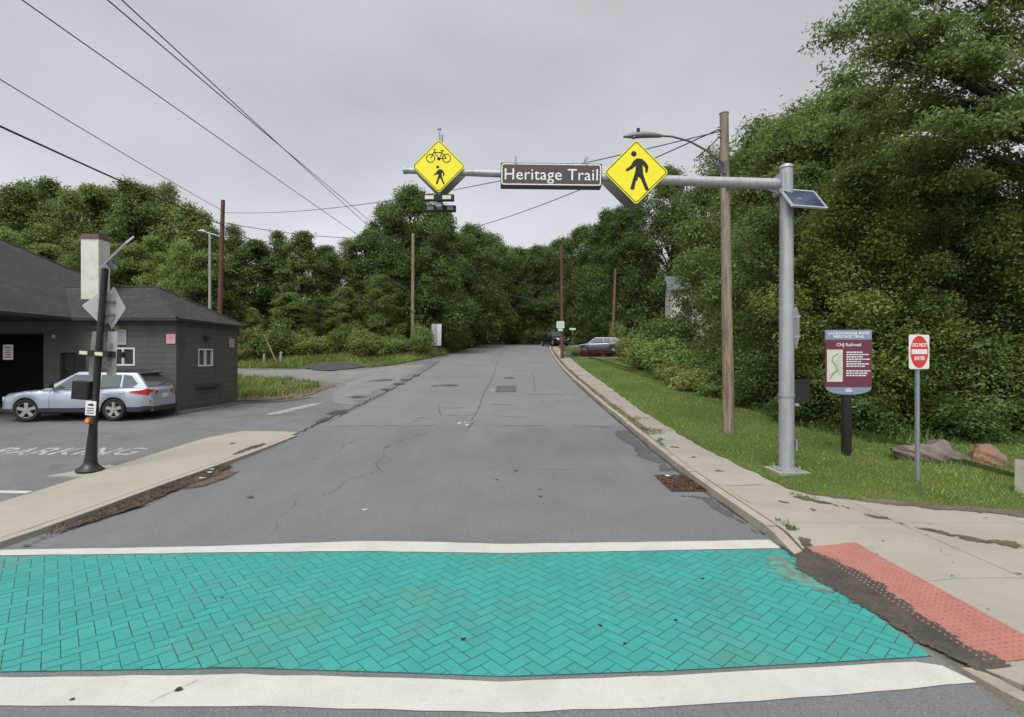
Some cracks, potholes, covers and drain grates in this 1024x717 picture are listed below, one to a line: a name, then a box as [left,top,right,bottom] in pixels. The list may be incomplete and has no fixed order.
pothole [182,470,237,489]
drain grate [653,474,707,491]
crack [299,361,440,432]
